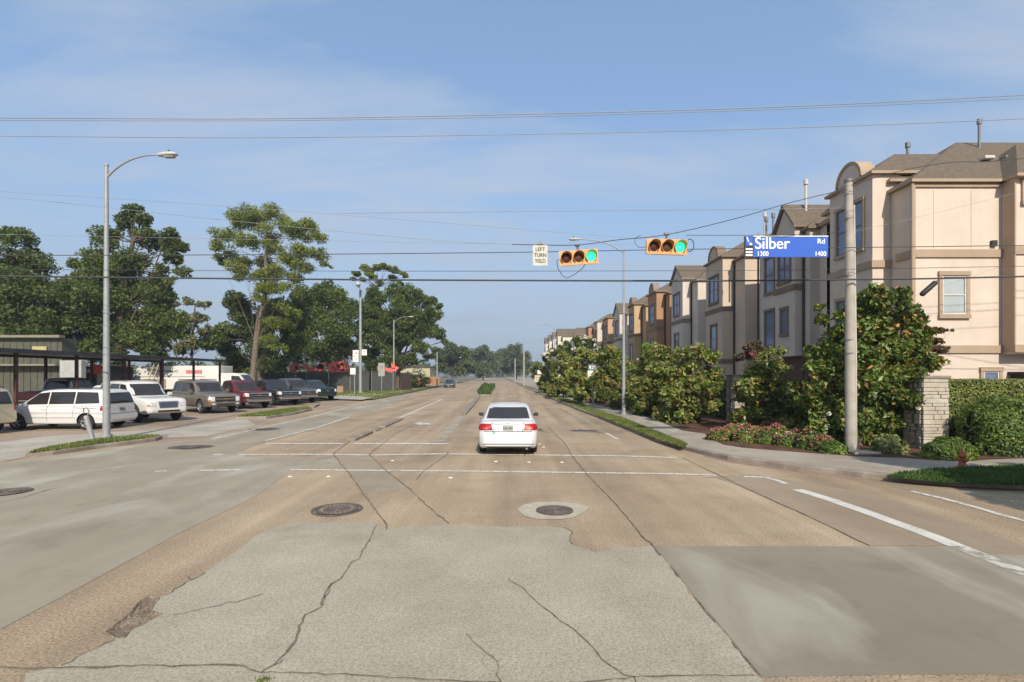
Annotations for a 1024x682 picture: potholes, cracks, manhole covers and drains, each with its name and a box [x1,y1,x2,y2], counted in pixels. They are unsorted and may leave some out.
manhole cover [0,487,34,495]
manhole cover [517,502,589,519]
manhole cover [311,503,363,516]
crack [0,525,754,682]
pothole [105,593,163,639]
